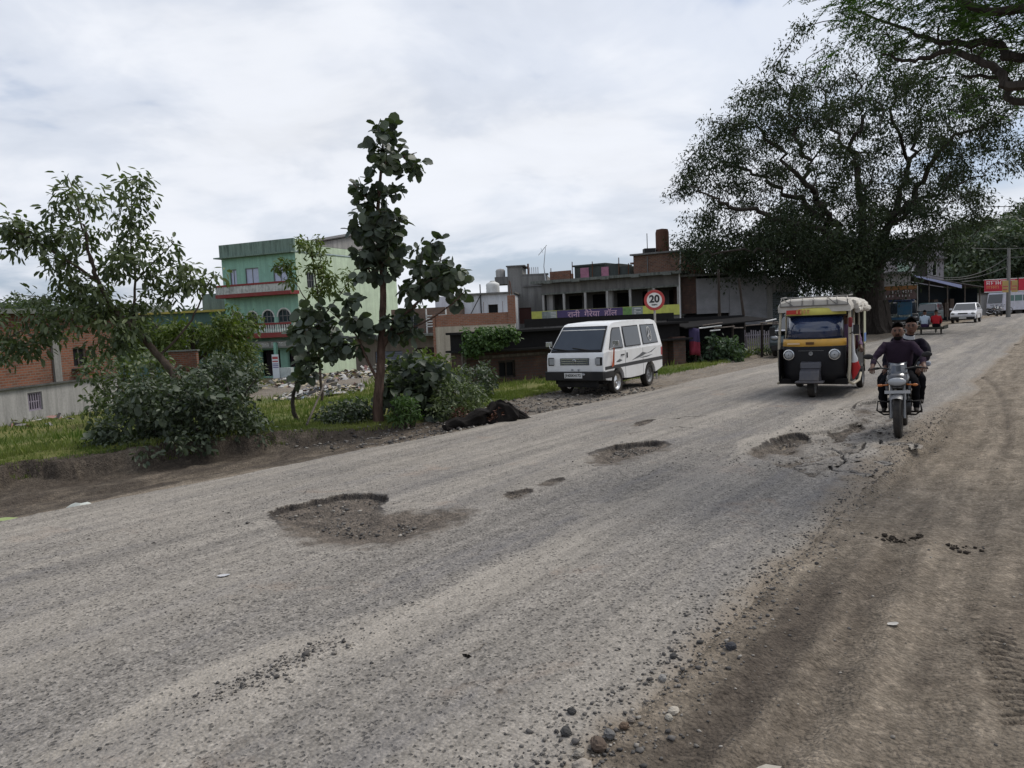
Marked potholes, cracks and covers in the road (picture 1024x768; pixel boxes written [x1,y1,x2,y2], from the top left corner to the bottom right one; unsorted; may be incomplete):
pothole [241,488,501,558]
pothole [491,486,546,502]
pothole [809,420,872,444]
crack [791,399,923,478]
pothole [567,437,688,470]
pothole [729,430,838,465]
pothole [530,475,578,489]
pothole [626,418,662,428]
